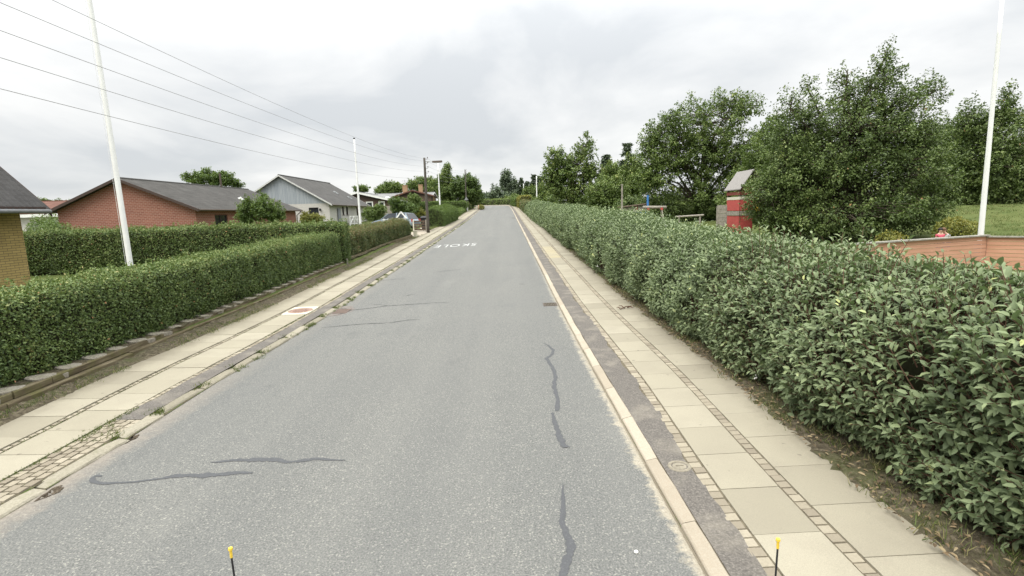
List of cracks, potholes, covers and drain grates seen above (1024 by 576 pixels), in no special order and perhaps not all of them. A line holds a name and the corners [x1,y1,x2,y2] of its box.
utility cover [668,460,692,472]
manhole cover [281,306,319,315]
